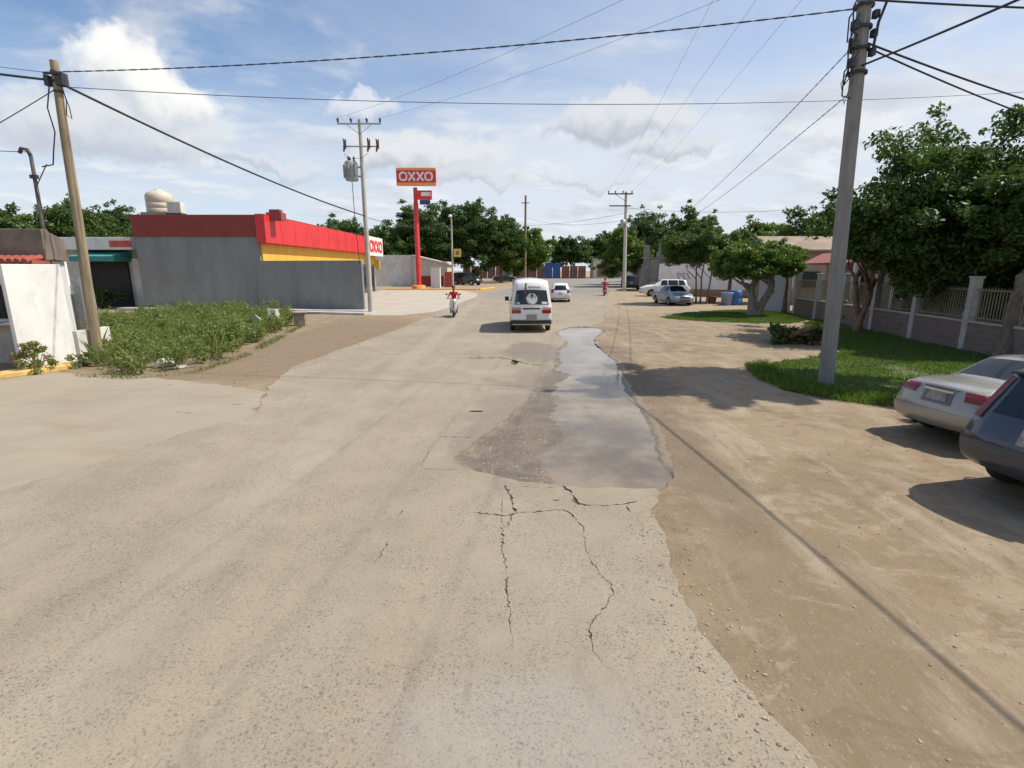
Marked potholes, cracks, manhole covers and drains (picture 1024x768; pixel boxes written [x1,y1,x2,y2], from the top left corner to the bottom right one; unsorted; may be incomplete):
crack [467,485,636,671]
pothole [453,326,674,489]
